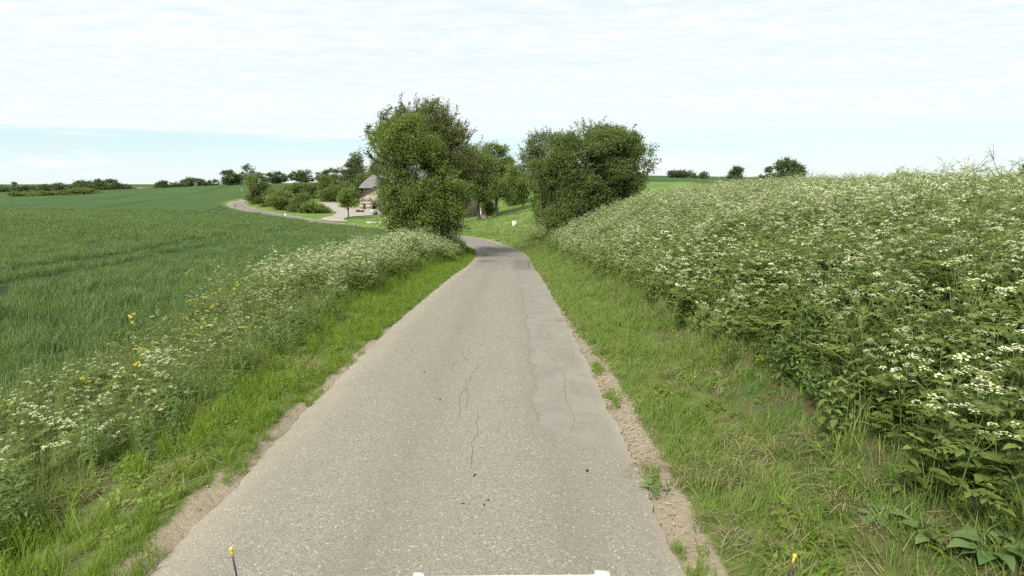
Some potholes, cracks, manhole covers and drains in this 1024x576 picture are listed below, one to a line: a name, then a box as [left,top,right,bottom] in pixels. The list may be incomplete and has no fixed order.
crack [453,354,478,469]
